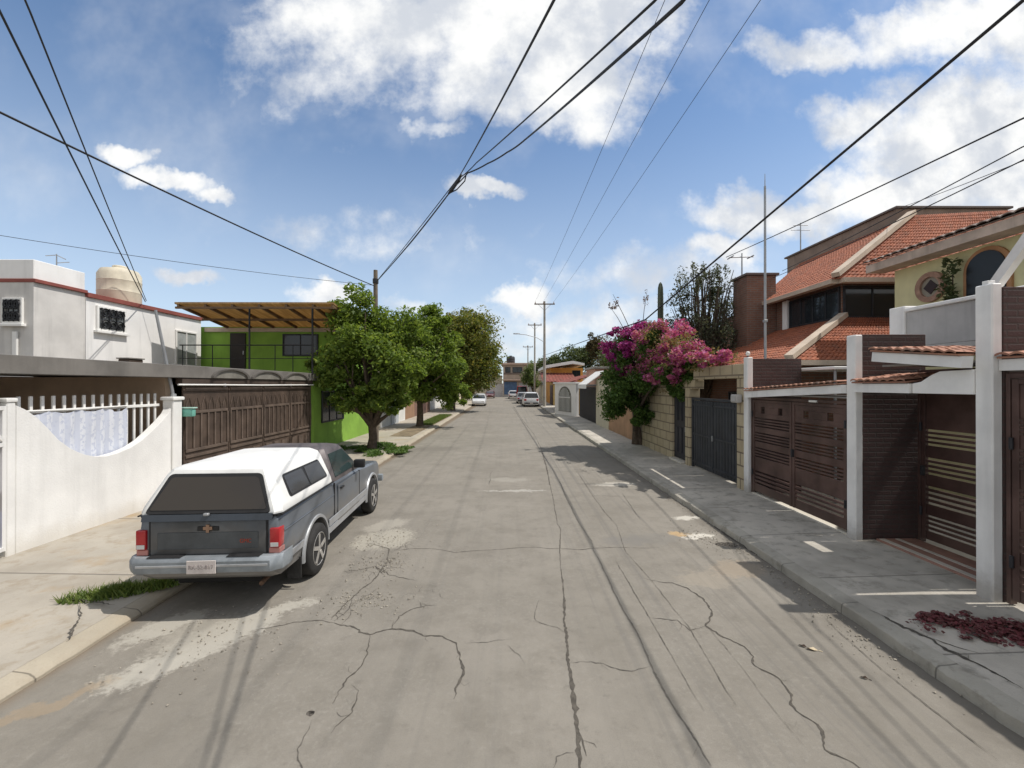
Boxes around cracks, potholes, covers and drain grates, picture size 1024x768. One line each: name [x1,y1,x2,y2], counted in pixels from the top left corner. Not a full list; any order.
crack [256,479,860,768]
crack [50,599,112,638]
